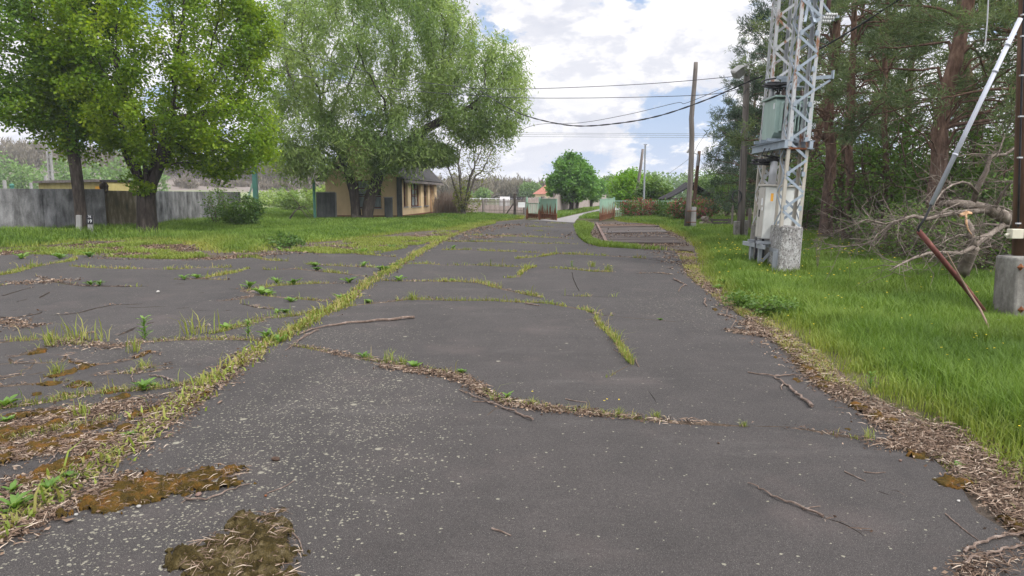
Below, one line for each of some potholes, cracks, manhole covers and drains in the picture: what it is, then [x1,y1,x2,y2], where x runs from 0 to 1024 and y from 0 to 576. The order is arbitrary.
crack [0,346,179,439]
crack [0,276,157,336]
